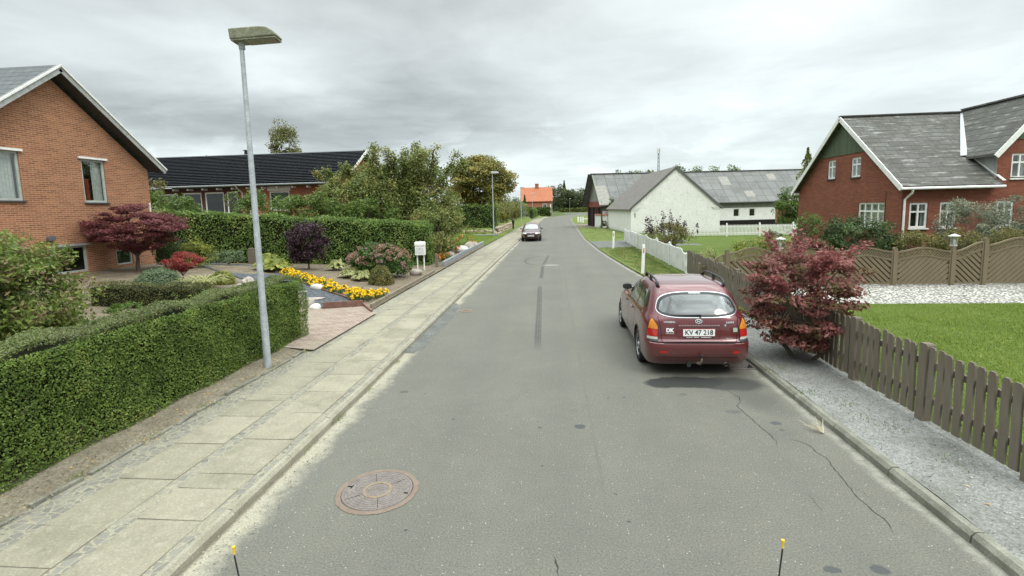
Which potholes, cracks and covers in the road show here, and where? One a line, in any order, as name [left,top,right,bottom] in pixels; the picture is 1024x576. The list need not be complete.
manhole cover [334,469,419,515]
drain grate [726,361,757,370]
crack [795,440,892,531]
